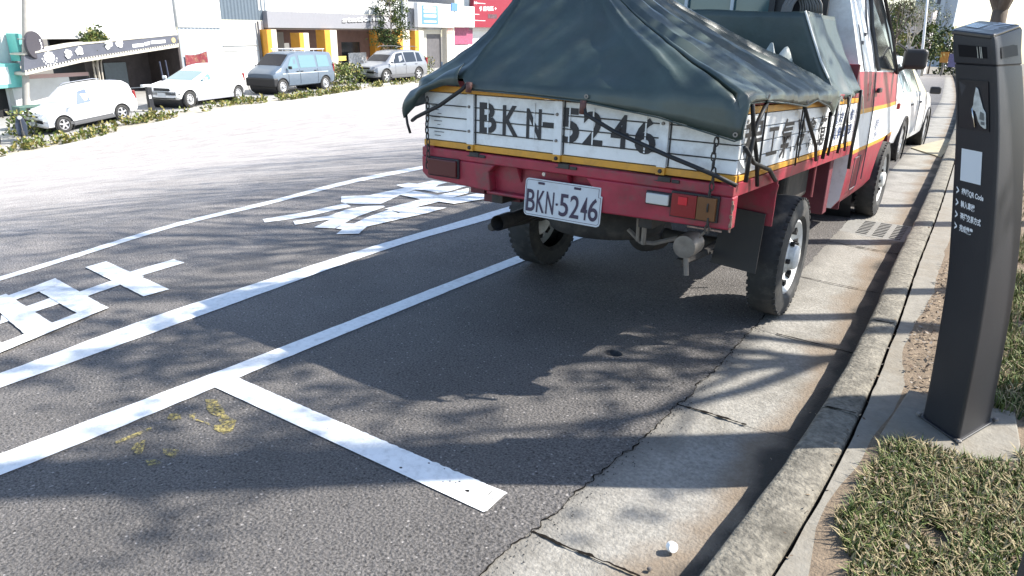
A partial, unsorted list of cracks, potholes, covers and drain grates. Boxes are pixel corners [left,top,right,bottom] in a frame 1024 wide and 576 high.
crack [479,314,852,576]
